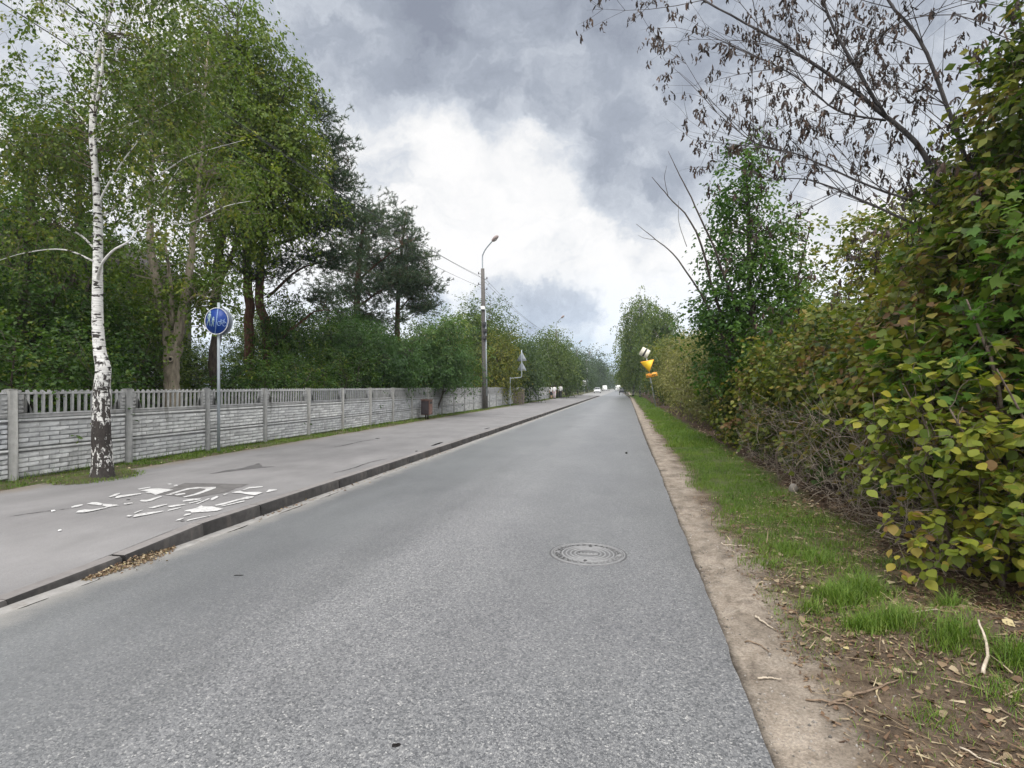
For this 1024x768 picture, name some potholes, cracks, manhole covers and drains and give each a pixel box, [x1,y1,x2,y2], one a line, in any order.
manhole cover [549,542,627,566]
